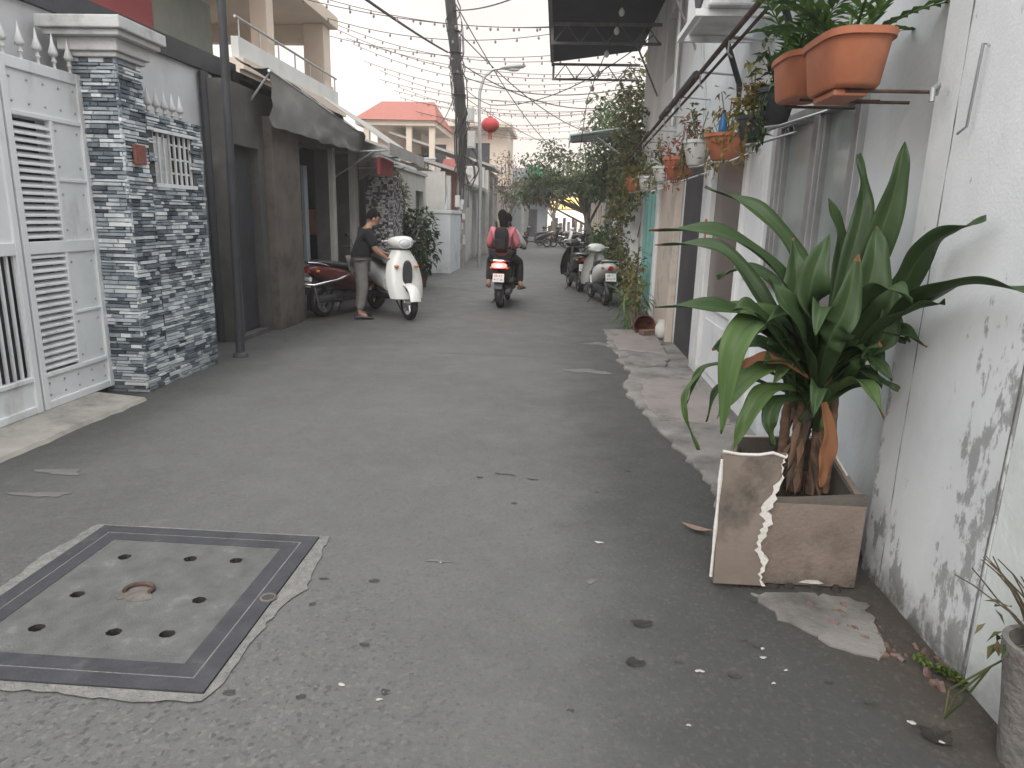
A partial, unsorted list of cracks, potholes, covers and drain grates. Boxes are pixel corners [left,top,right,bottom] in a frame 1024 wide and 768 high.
pothole [626,656,646,667]
manhole cover [0,524,330,702]
pothole [631,619,653,628]
